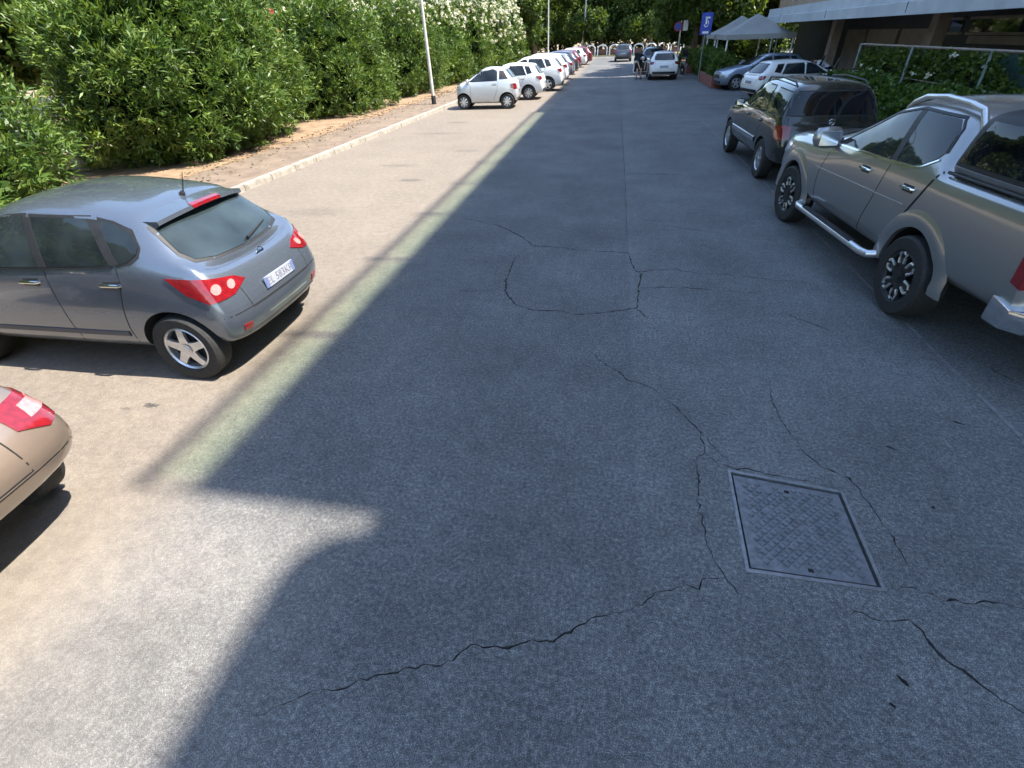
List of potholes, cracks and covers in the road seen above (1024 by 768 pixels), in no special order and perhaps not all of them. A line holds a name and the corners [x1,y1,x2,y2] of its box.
crack [246,347,1024,719]
manhole cover [727,469,887,592]
crack [459,219,788,318]
